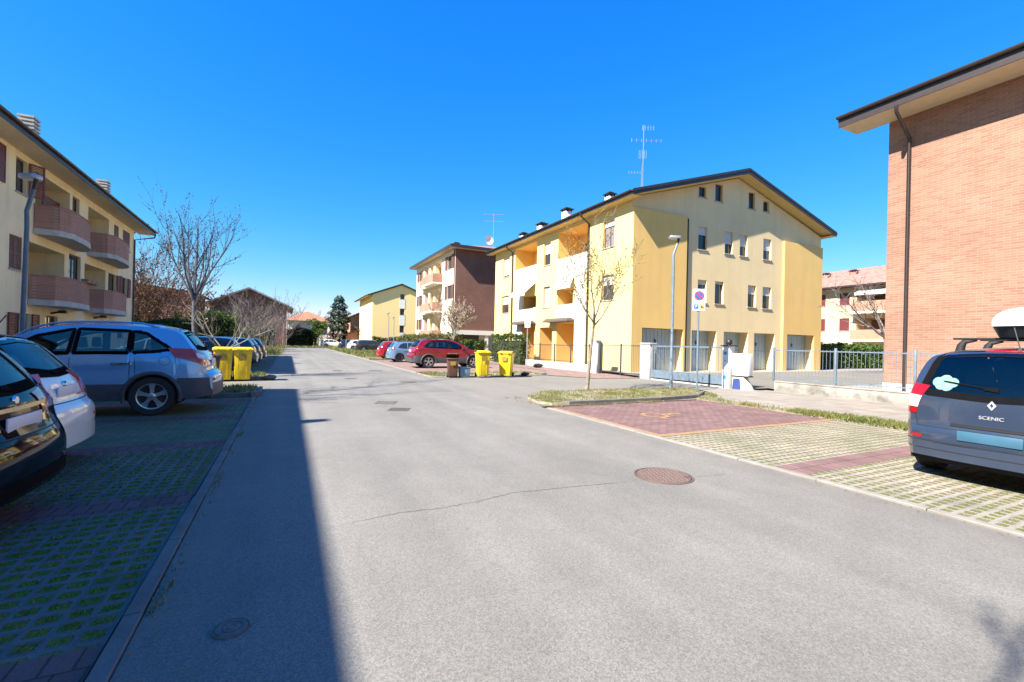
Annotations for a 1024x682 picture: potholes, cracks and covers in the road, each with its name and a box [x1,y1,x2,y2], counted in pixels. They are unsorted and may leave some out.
manhole cover [634,467,694,485]
crack [345,480,640,524]
manhole cover [211,618,250,640]
